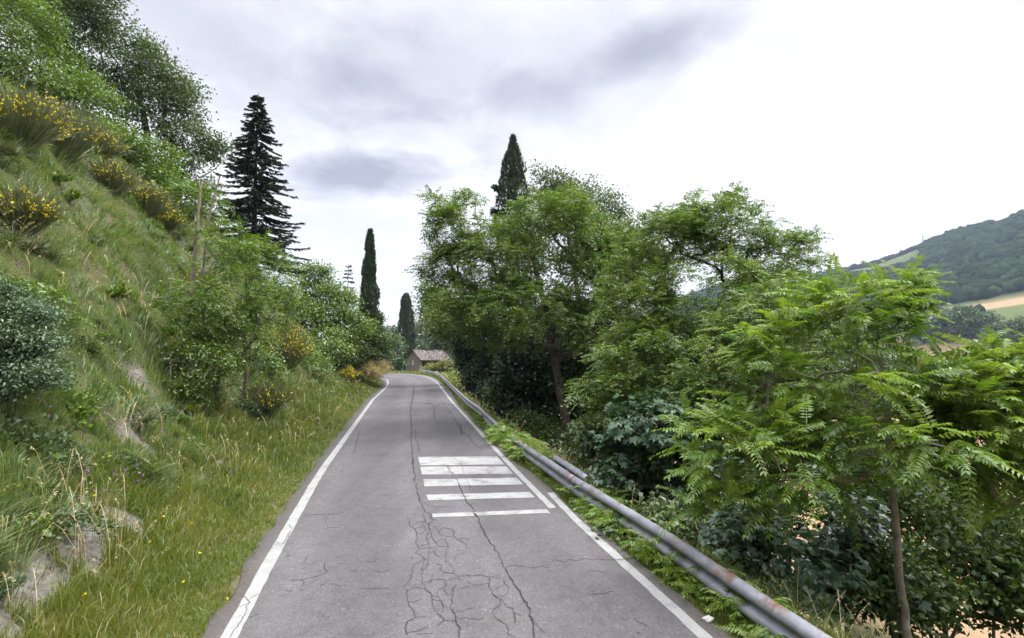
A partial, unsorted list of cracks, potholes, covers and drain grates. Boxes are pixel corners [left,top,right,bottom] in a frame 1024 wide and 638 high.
crack [404,405,628,637]
crack [283,526,345,591]
